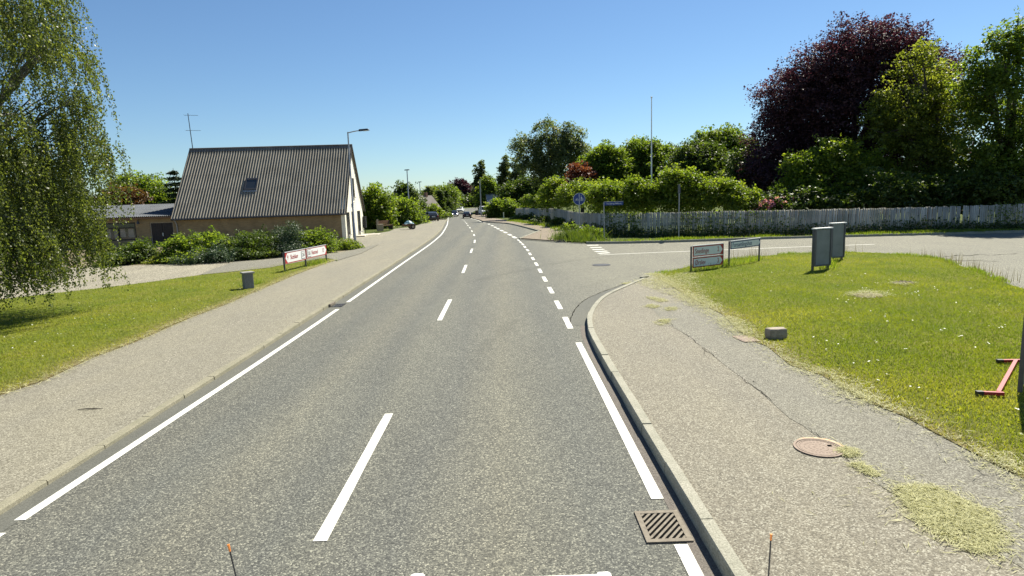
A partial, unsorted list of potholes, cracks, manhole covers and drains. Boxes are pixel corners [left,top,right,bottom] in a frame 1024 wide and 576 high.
drain grate [634,510,694,544]
manhole cover [793,437,843,458]
